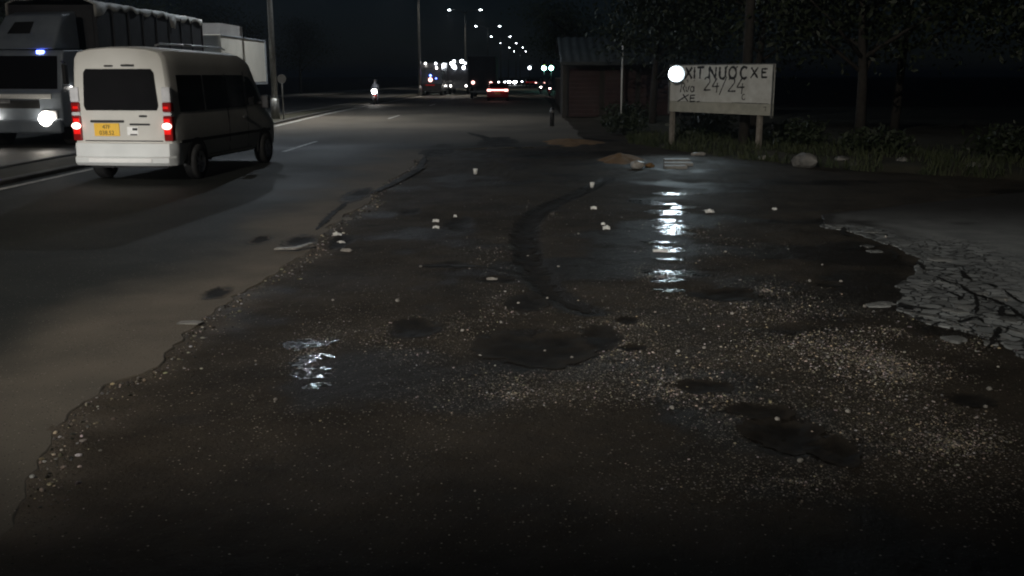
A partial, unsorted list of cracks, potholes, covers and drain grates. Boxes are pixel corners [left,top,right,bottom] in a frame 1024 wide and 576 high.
pothole [723,401,797,422]
pothole [470,330,601,369]
pothole [735,417,833,457]
pothole [248,235,271,244]
pothole [393,316,444,339]
pothole [203,286,234,299]
pothole [948,392,998,407]
crack [834,227,1024,347]
pothole [580,324,626,351]
pothole [802,434,864,468]
pothole [673,378,736,394]
